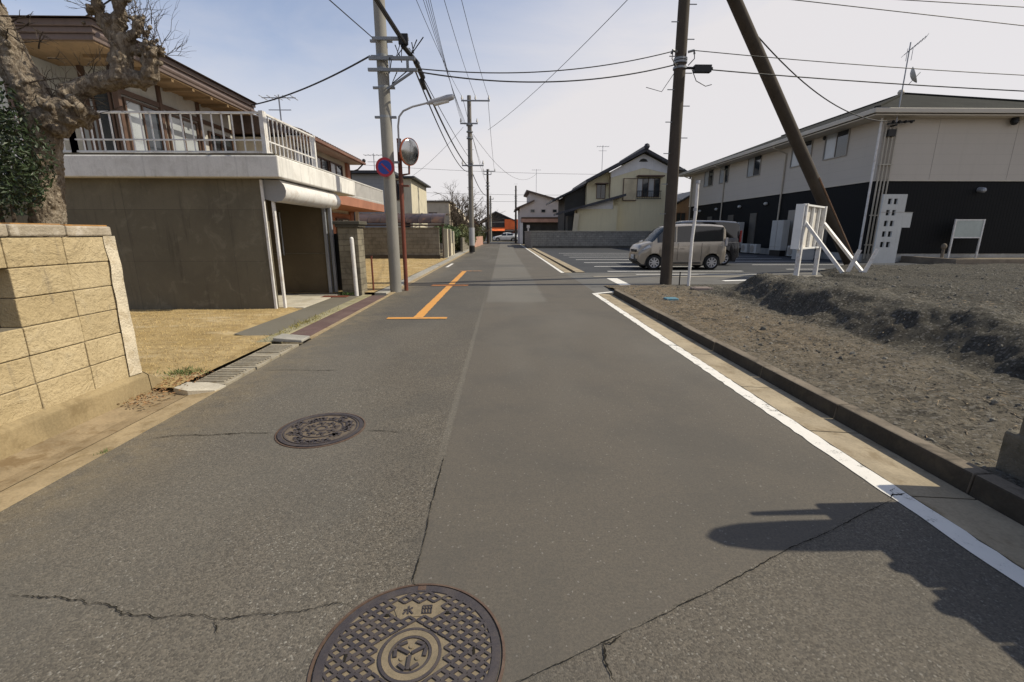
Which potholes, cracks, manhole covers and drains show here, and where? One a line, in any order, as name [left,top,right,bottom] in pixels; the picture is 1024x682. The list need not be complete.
crack [517,488,904,681]
manhole cover [274,413,366,449]
crack [11,594,349,632]
manhole cover [307,583,505,682]
